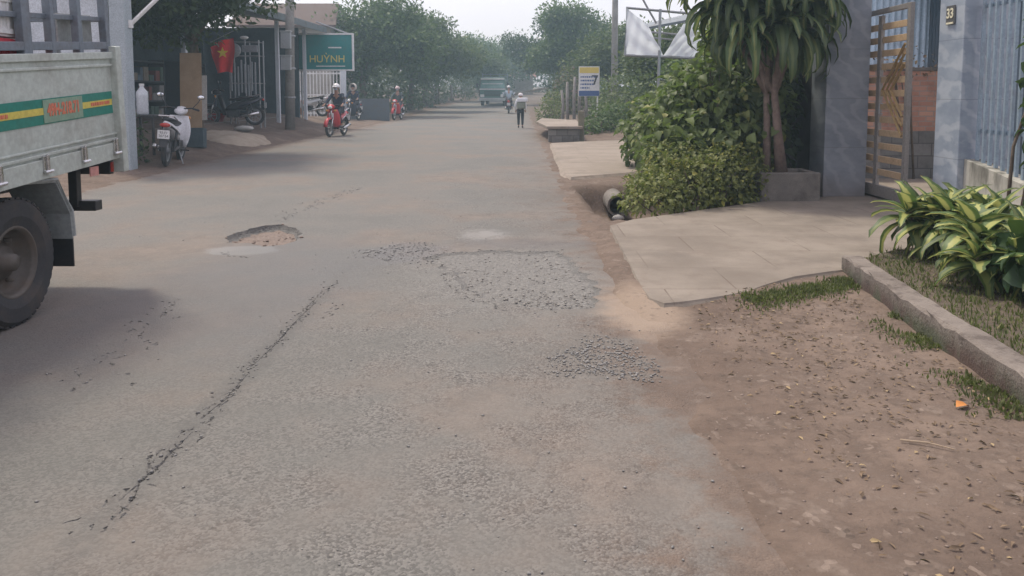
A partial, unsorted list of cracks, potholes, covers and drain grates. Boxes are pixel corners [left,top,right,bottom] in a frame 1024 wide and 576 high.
pothole [225,223,304,247]
crack [278,186,359,222]
crack [62,280,343,535]
